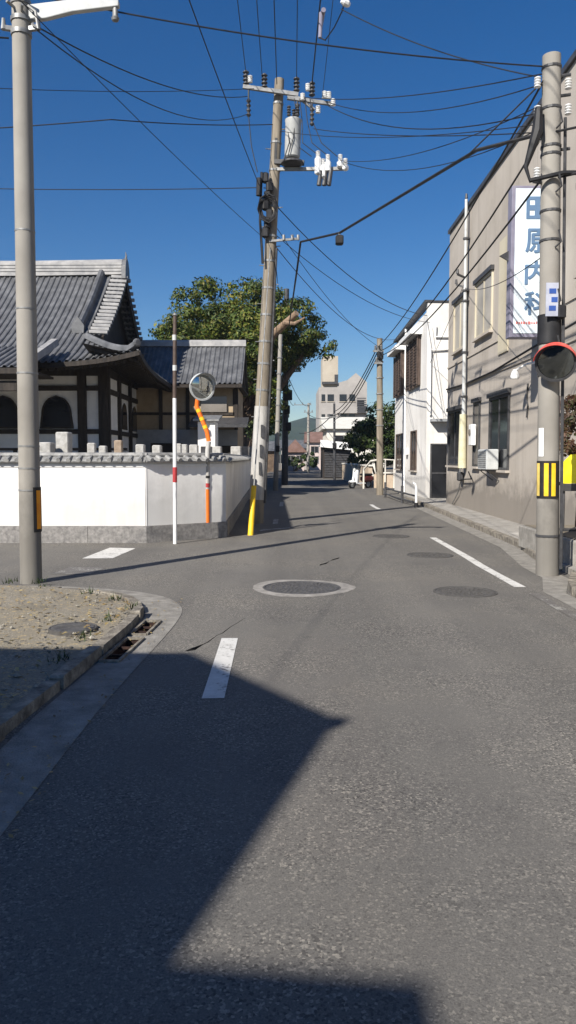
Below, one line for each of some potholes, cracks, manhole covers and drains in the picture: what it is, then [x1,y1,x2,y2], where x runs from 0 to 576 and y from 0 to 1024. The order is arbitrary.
manhole cover [253,580,356,597]
manhole cover [48,622,98,636]
crack [186,618,245,651]
manhole cover [433,586,498,598]
